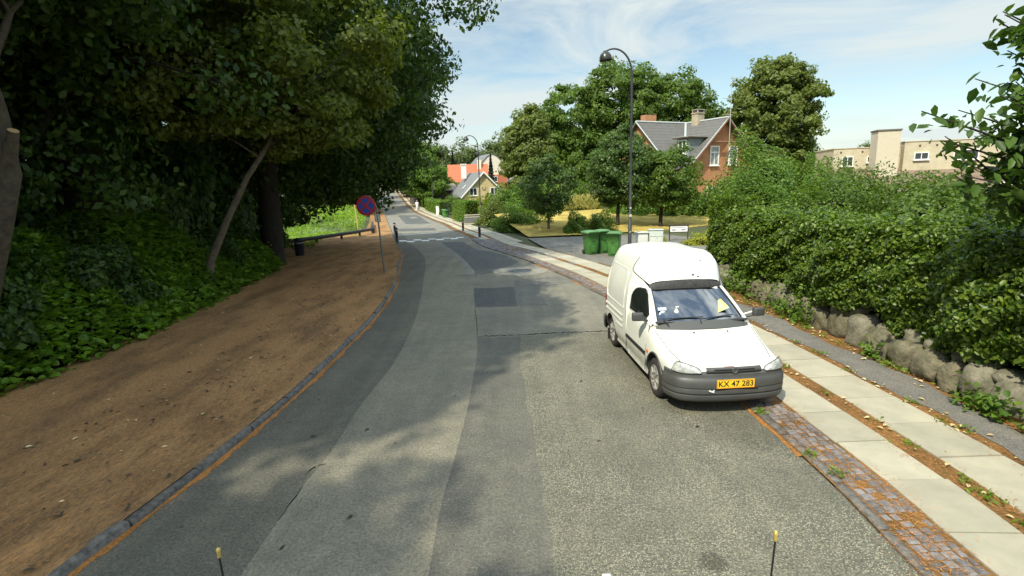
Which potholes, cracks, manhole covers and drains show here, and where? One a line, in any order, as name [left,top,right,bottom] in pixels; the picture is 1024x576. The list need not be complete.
manhole cover [492,266,548,276]
crack [277,463,326,521]
